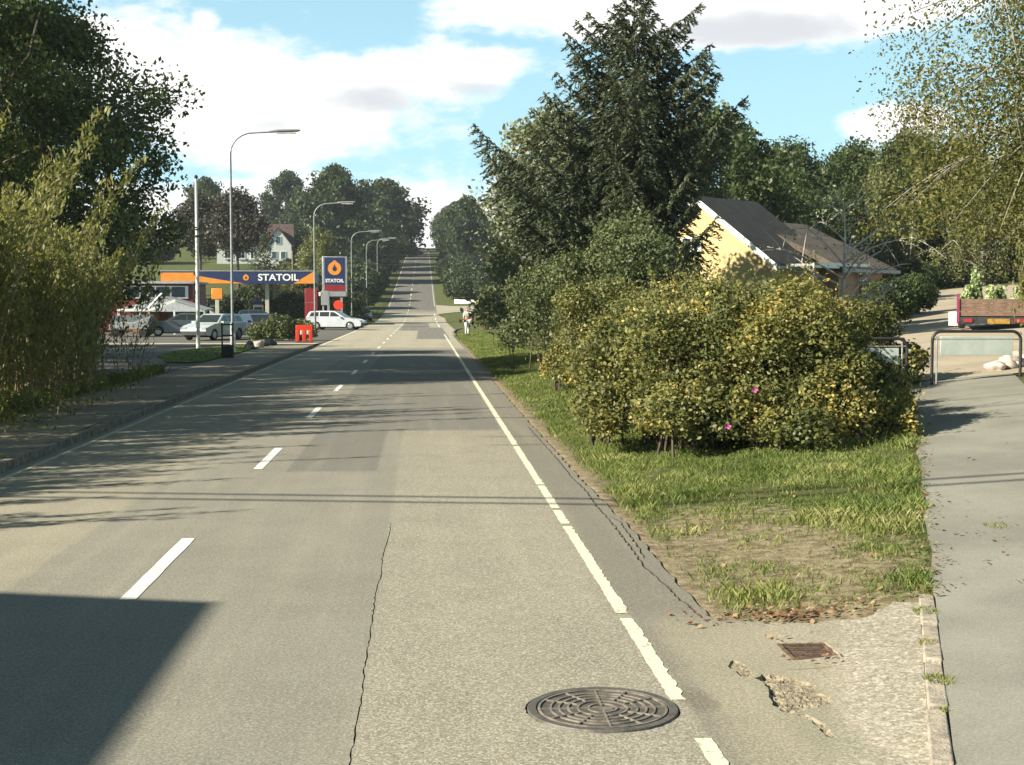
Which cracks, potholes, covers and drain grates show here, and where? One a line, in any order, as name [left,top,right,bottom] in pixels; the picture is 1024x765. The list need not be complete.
manhole cover [527,687,679,733]
drain grate [777,643,838,660]
crack [349,527,391,765]
pothole [728,660,754,678]
pothole [755,674,832,714]
